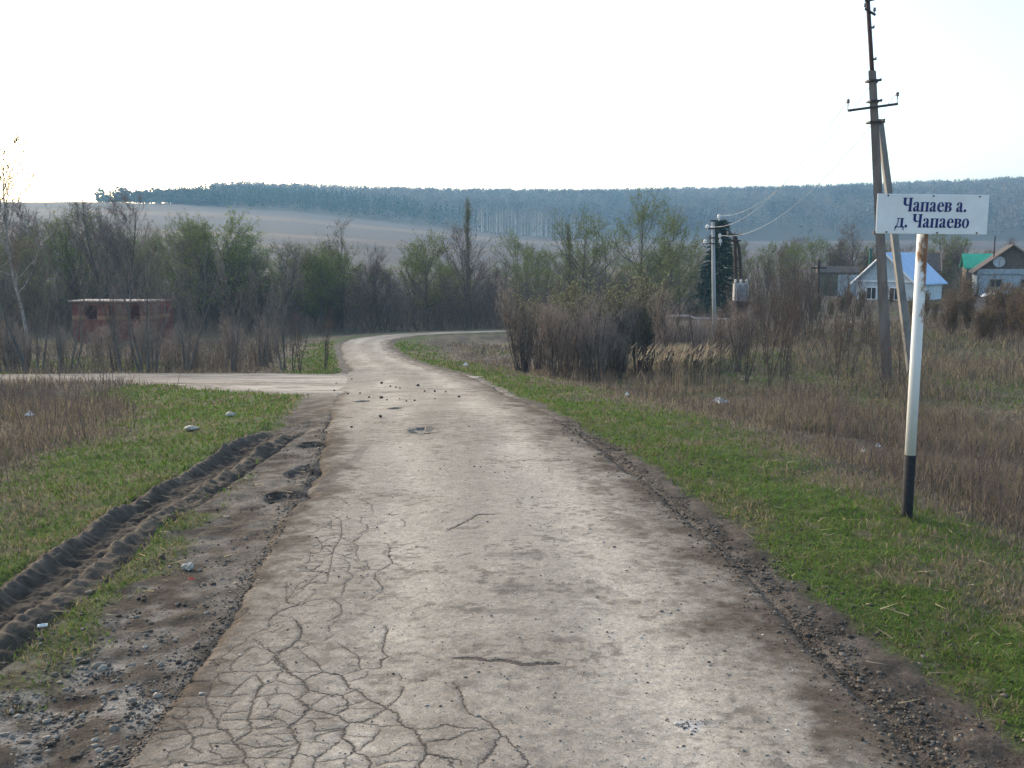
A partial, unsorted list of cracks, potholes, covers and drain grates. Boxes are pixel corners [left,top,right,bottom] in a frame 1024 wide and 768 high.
pothole [286,466,312,480]
pothole [265,493,298,504]
crack [135,498,560,768]
pothole [407,426,440,435]
